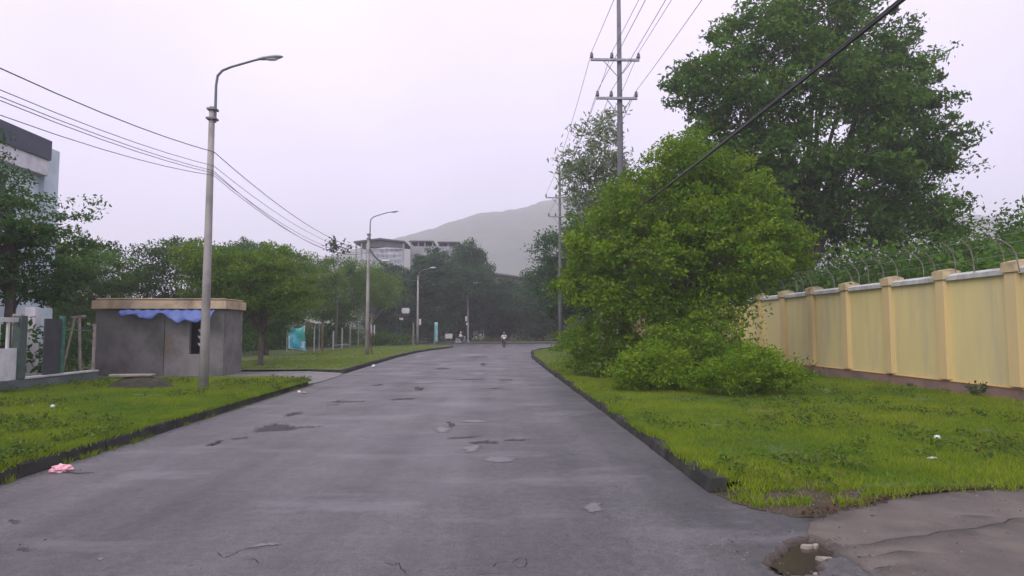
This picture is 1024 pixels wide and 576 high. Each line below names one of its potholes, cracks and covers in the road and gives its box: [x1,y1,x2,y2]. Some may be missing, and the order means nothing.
pothole [759,535,843,576]
crack [858,515,1021,569]
crack [217,547,279,565]
crack [478,558,528,575]
